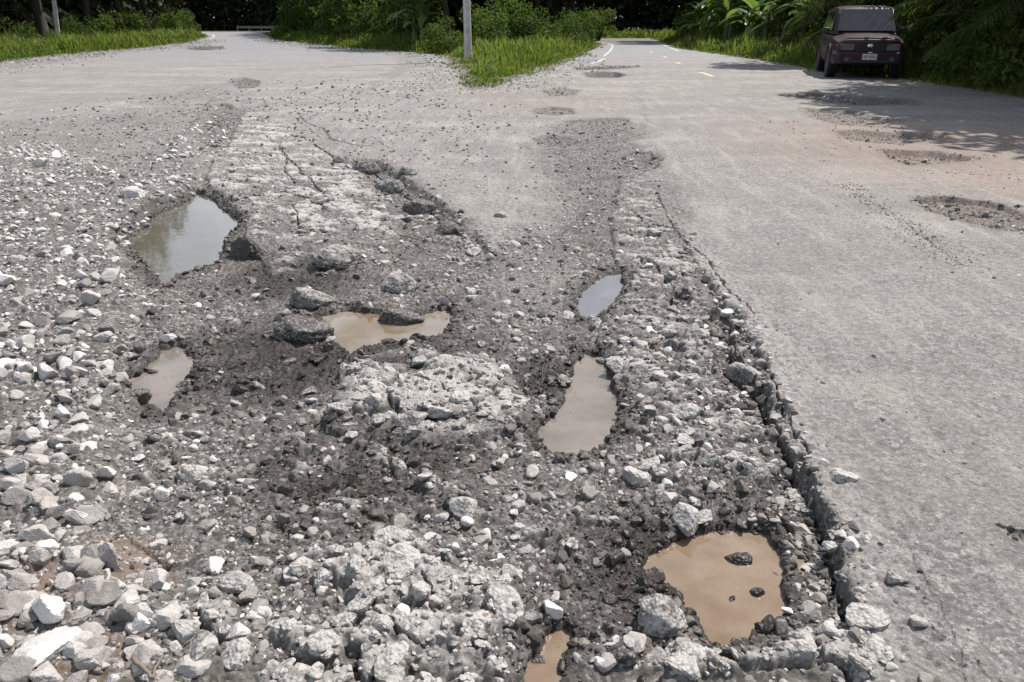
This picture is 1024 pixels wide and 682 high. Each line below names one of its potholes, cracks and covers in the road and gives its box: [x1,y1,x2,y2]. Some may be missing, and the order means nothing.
pothole [543,88,580,96]
pothole [523,343,635,460]
pothole [786,93,911,105]
pothole [568,265,634,323]
pothole [312,301,464,354]
crack [228,112,464,237]
pothole [513,611,589,682]
pothole [916,195,1024,232]
pothole [117,188,251,286]
pothole [627,506,803,648]
pothole [117,337,207,417]
pothole [534,106,577,115]
